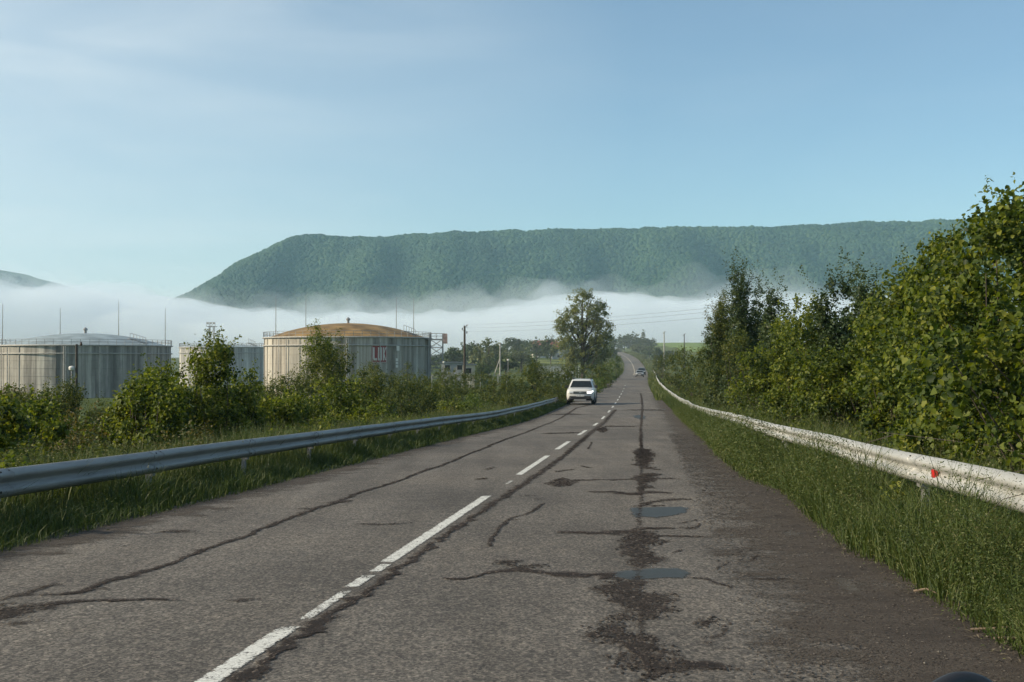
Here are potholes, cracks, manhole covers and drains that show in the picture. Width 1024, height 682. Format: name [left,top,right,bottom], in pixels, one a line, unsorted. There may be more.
crack [618,639,651,681]
crack [0,405,701,626]
